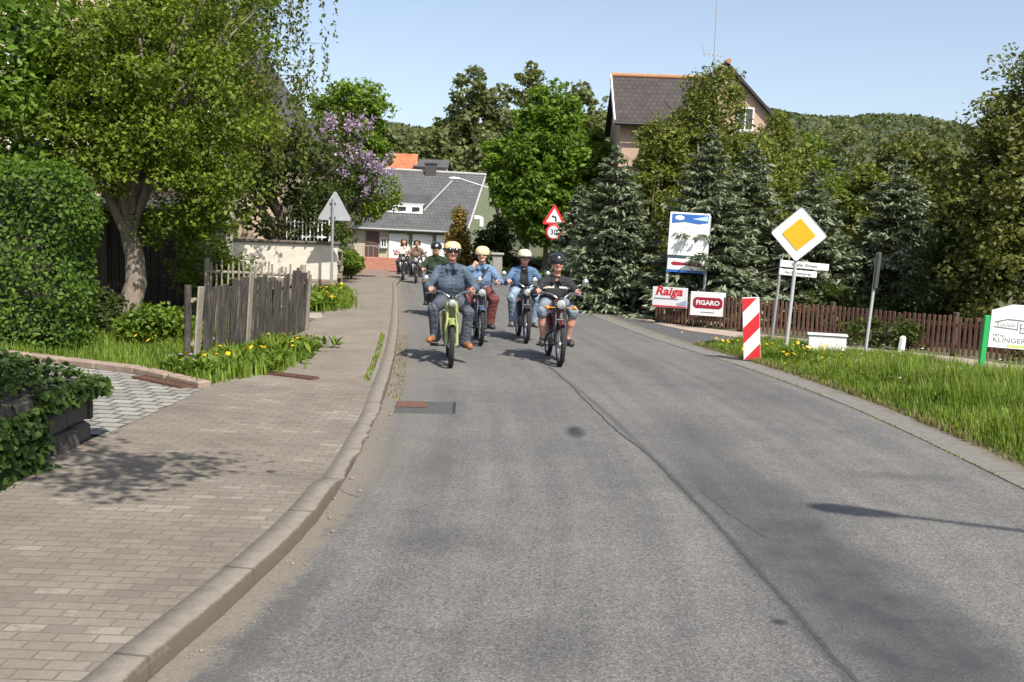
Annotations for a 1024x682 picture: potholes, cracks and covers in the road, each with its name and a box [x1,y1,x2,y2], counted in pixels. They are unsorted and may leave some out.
crack [548,366,859,682]
manhole cover [394,401,456,414]
